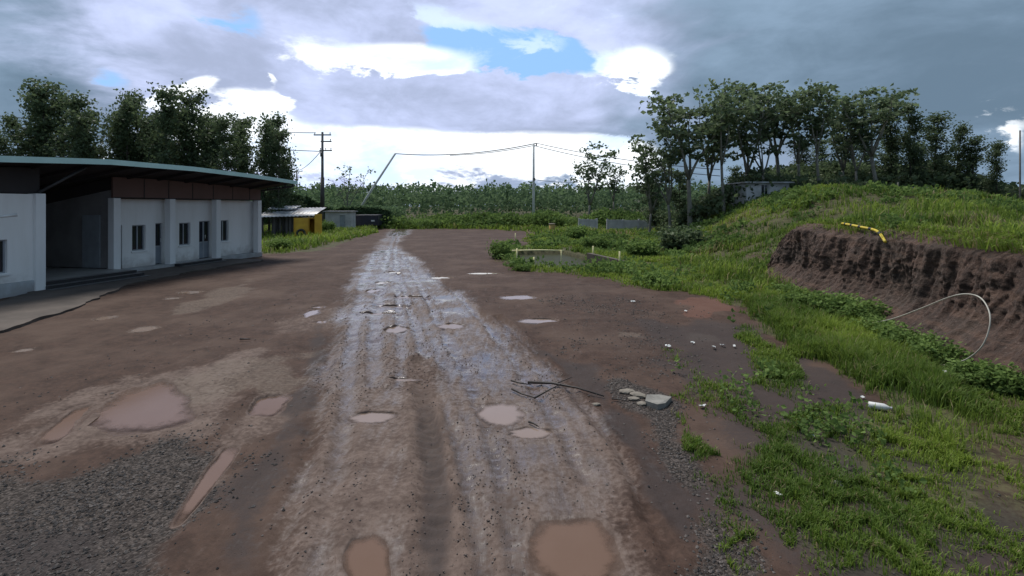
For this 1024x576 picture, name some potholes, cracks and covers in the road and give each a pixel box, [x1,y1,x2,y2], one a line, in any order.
pothole [511,316,564,325]
pothole [162,441,248,535]
pothole [466,399,536,433]
pothole [119,325,168,334]
pothole [376,323,417,335]
pothole [326,526,404,576]
pothole [510,510,636,576]
pothole [500,424,563,444]
pothole [429,322,472,332]
pothole [339,407,406,427]
pothole [239,391,298,420]
pothole [69,376,207,439]
